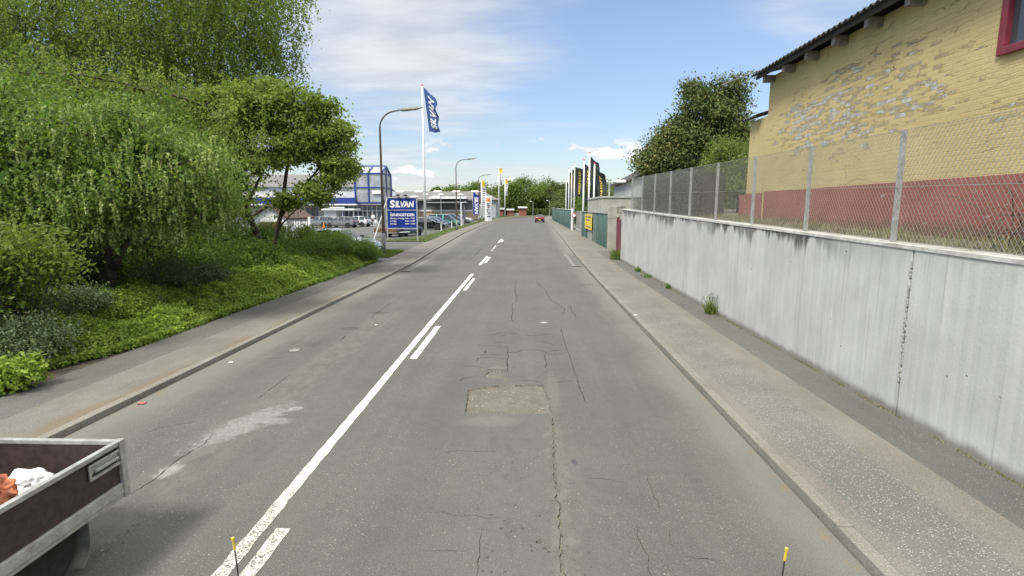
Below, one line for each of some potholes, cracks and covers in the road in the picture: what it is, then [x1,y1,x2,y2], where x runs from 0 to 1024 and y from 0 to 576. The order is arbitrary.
crack [134,421,211,492]
crack [444,512,500,575]
crack [461,285,586,402]
